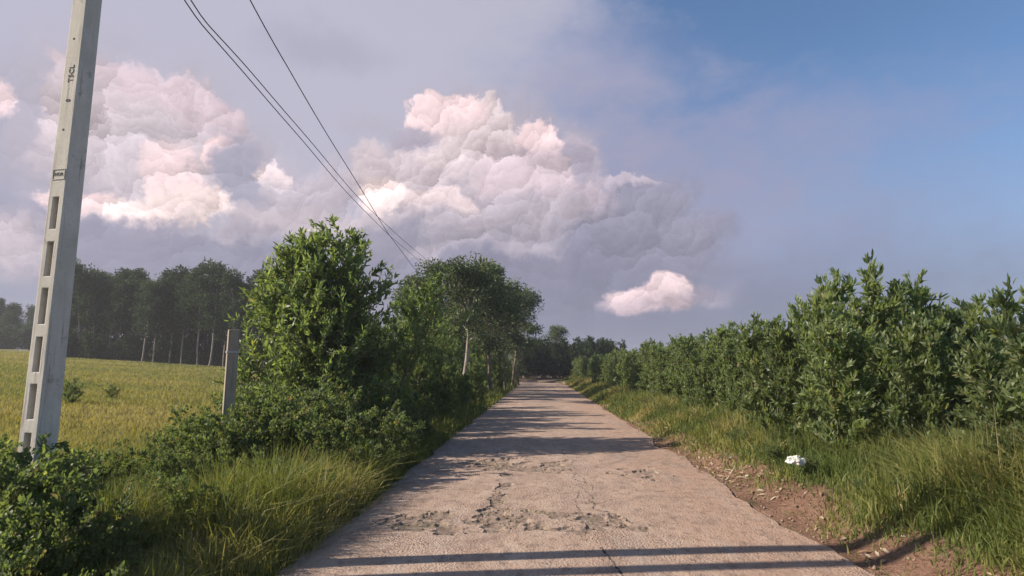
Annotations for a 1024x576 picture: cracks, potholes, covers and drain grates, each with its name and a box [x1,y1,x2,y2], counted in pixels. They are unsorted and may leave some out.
pothole [606,468,679,482]
crack [561,450,631,523]
crack [600,547,624,576]
pothole [367,507,656,536]
pothole [461,457,578,474]
pothole [486,473,516,508]
